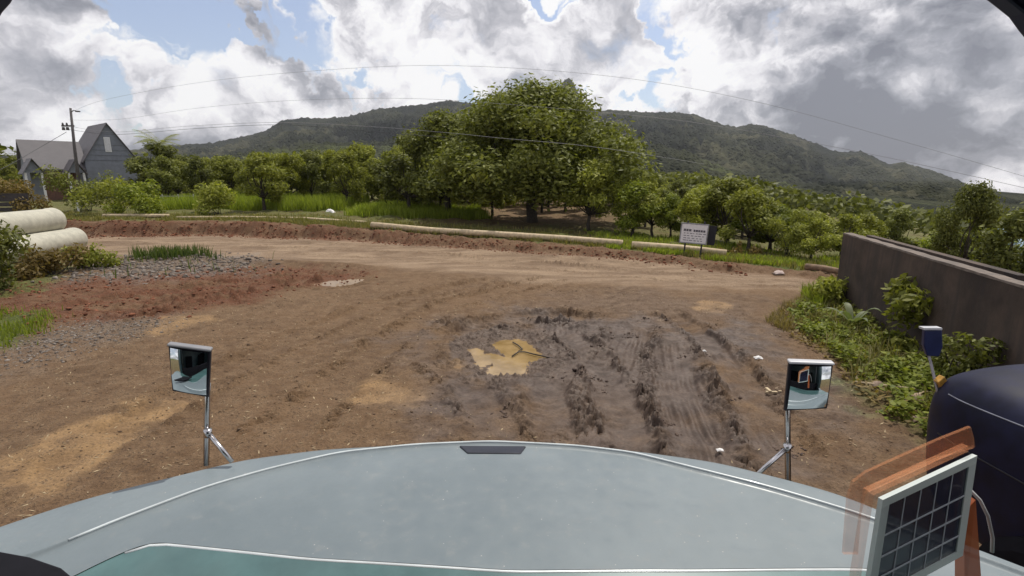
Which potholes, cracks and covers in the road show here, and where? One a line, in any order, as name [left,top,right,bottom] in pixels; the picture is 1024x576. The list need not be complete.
pothole [433,325,583,390]
pothole [303,272,378,290]
